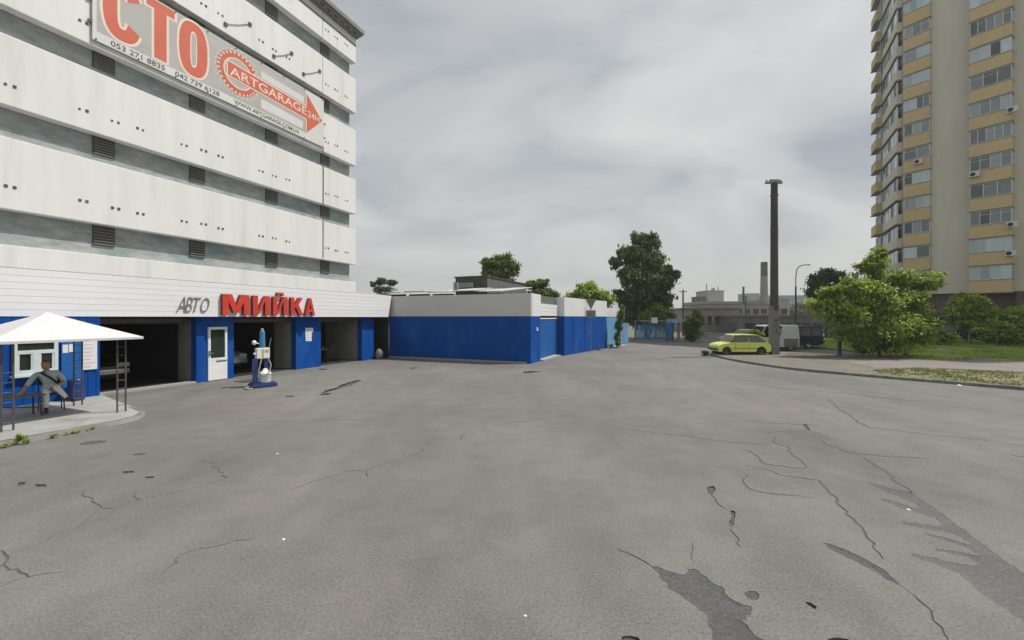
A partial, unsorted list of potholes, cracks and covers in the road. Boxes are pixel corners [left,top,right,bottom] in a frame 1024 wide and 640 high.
crack [0,459,228,587]
crack [164,538,253,572]
crack [290,444,426,490]
crack [630,398,1023,559]
crack [900,585,949,640]
